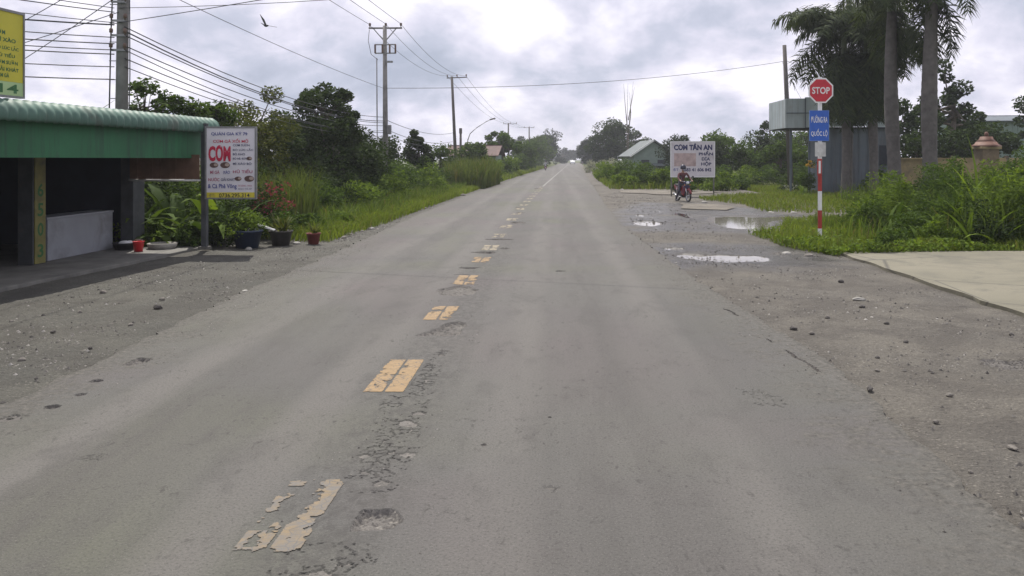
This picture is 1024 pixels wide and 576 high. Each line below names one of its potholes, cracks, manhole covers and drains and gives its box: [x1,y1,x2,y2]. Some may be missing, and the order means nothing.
crack [730,338,821,408]
pothole [122,357,152,366]
crack [253,540,386,576]
crack [721,308,740,316]
pothole [349,508,405,532]
pothole [670,252,776,263]
pothole [702,215,815,230]
pothole [415,321,468,337]
pothole [436,285,479,296]
